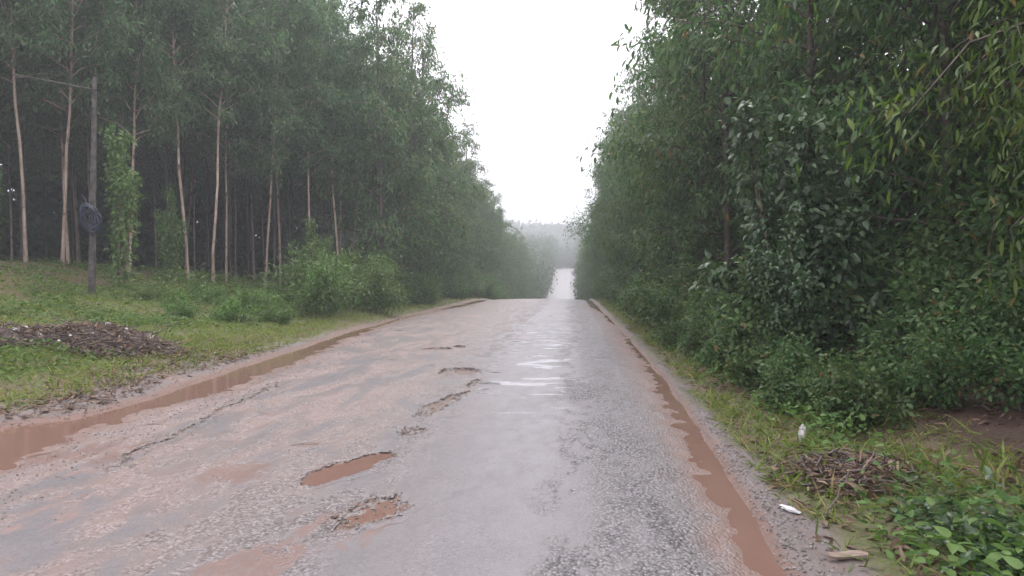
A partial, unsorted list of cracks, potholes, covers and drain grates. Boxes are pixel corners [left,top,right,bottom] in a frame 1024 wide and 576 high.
pothole [432,366,487,376]
pothole [461,377,488,389]
pothole [387,424,436,438]
pothole [281,448,407,491]
crack [102,380,289,468]
pothole [314,490,425,538]
pothole [412,389,474,418]
